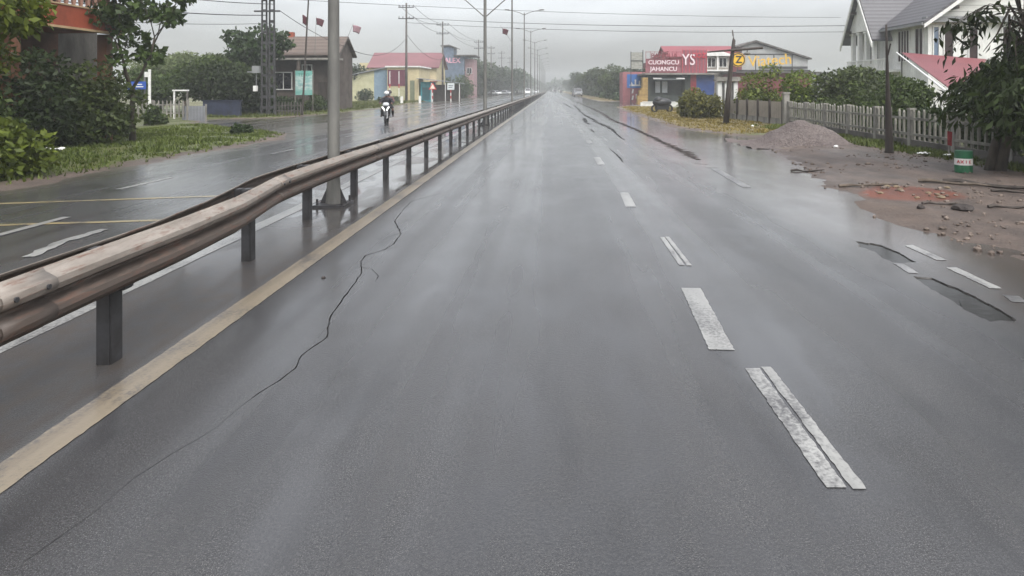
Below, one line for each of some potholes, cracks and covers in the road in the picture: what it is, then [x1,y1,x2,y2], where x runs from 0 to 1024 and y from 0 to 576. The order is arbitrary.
crack [24,192,445,562]
pothole [913,276,1016,322]
crack [563,102,711,168]
pothole [856,241,915,263]
